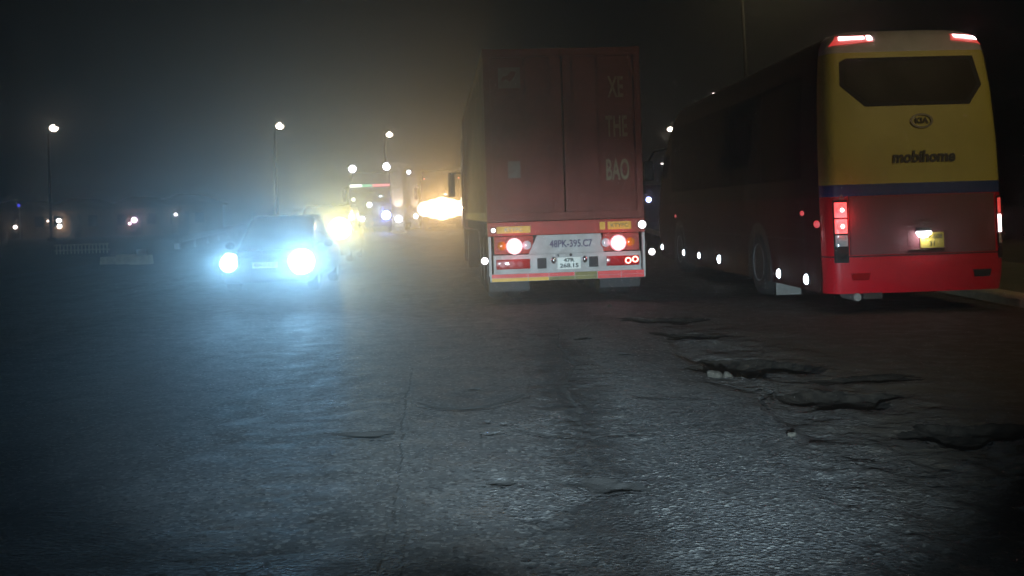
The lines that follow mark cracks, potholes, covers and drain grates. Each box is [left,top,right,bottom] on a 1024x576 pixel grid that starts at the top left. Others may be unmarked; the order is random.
pothole [571,474,664,497]
pothole [890,422,1024,452]
pothole [318,429,416,441]
pothole [609,317,715,326]
pothole [679,358,835,380]
pothole [475,476,527,488]
pothole [645,332,742,341]
pothole [760,389,914,412]
pothole [796,372,940,387]
